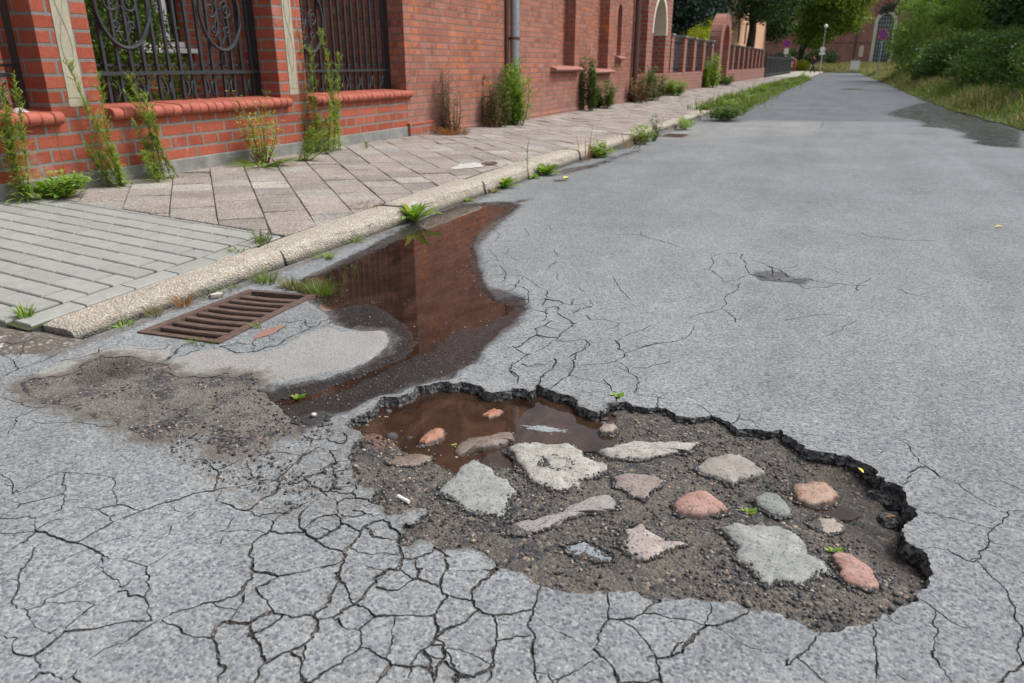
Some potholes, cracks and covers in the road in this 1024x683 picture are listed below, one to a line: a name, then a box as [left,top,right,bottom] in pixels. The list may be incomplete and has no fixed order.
crack [872,440,1024,683]
crack [709,252,872,322]
drain grate [137,289,317,357]
pothole [345,381,933,633]
crack [483,222,715,407]
crack [0,392,827,683]
